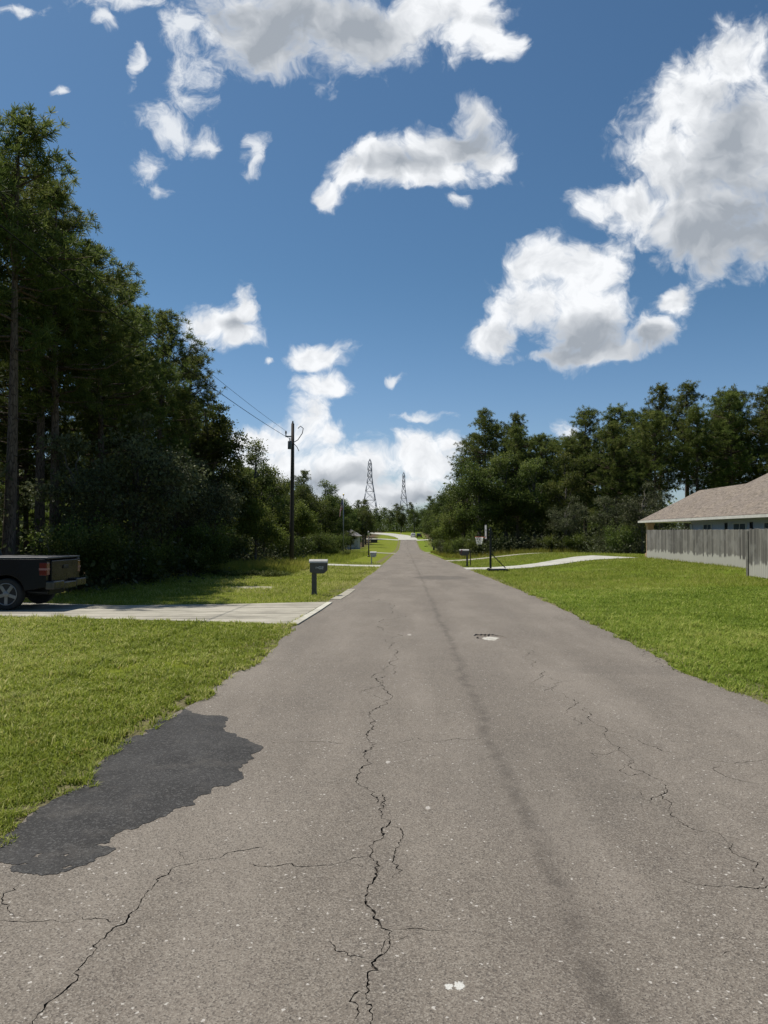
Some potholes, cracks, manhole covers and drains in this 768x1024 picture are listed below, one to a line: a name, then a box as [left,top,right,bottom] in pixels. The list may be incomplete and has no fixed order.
crack [252,593,447,1024]
crack [523,649,768,889]
crack [1,846,265,1024]
